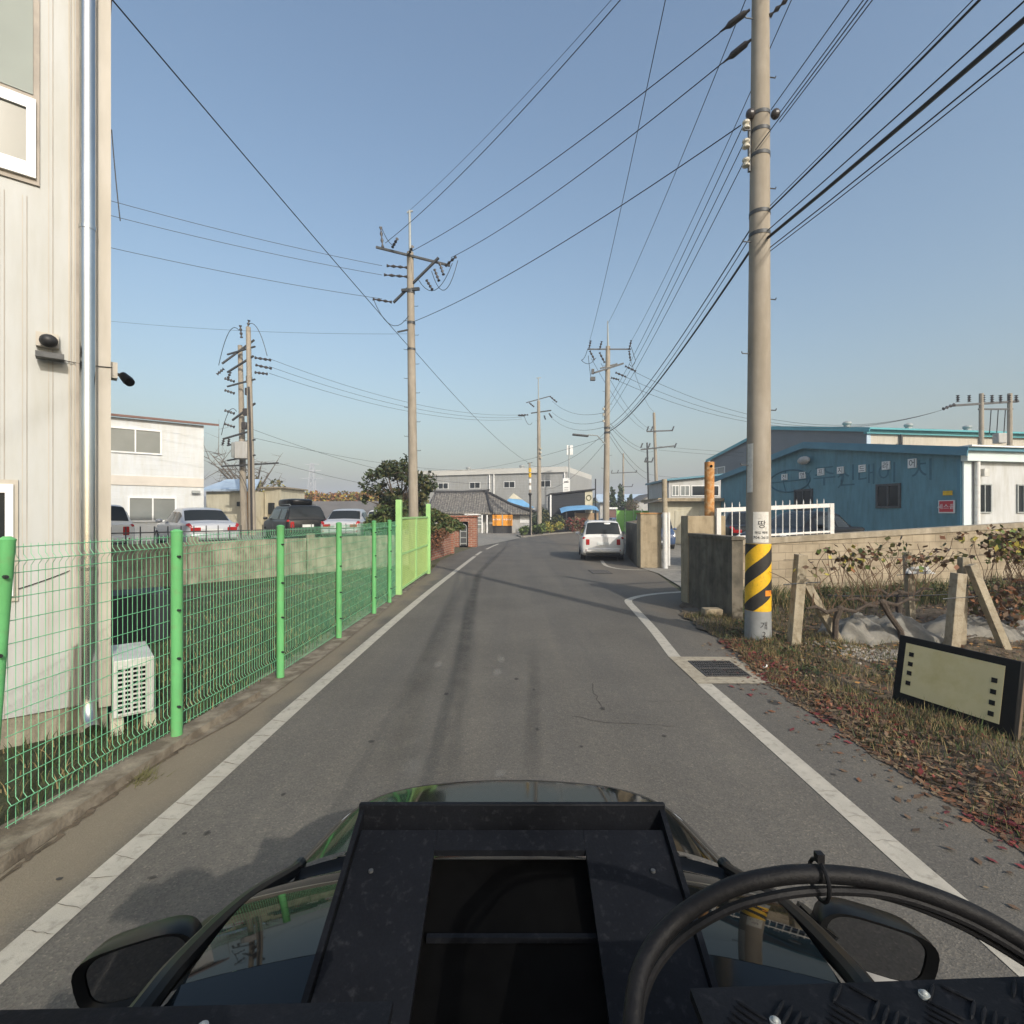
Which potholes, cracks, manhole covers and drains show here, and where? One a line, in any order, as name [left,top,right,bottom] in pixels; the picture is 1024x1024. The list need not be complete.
drain grate [670,657,793,695]
